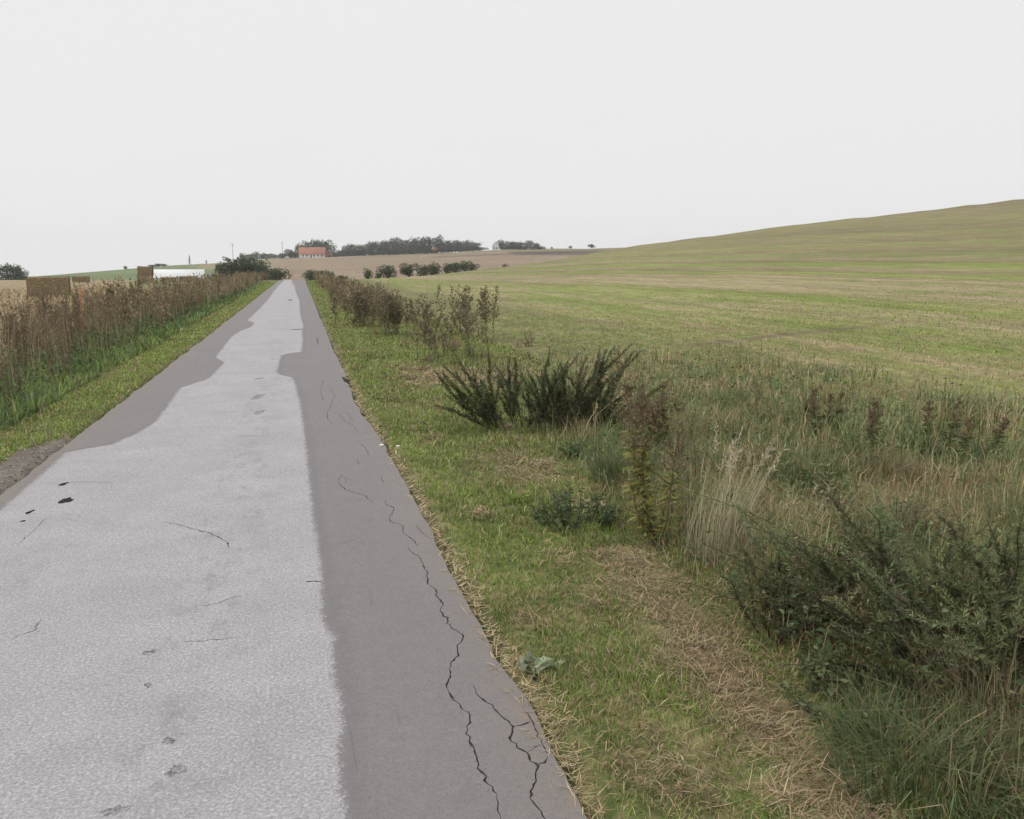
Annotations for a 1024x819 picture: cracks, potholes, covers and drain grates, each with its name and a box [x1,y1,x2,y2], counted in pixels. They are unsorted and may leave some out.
pothole [164,764,187,777]
crack [321,378,384,499]
crack [386,504,548,819]
pothole [97,805,134,816]
